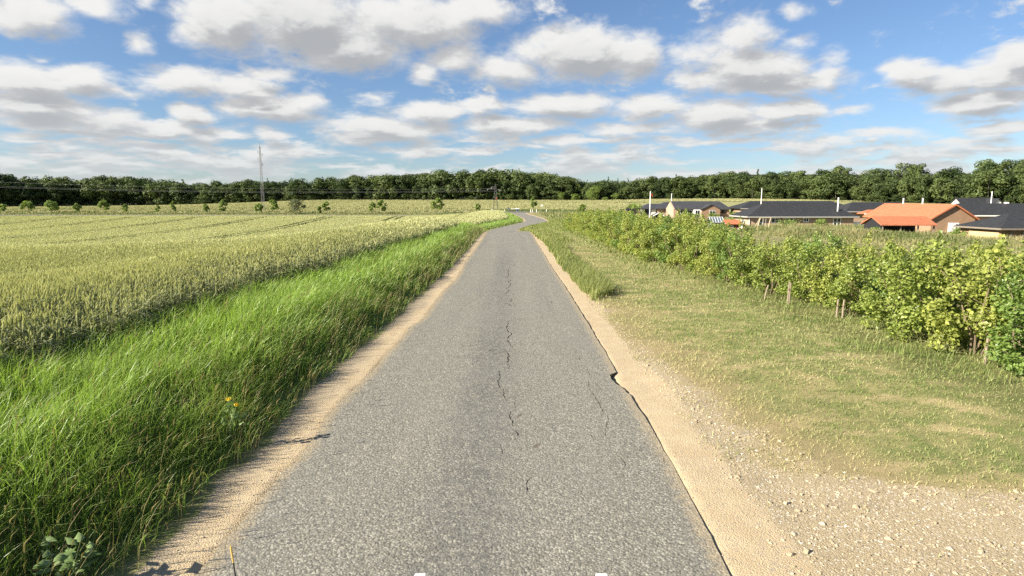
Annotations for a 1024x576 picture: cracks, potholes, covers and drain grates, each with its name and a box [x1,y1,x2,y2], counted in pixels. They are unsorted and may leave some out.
crack [495,323,519,454]
